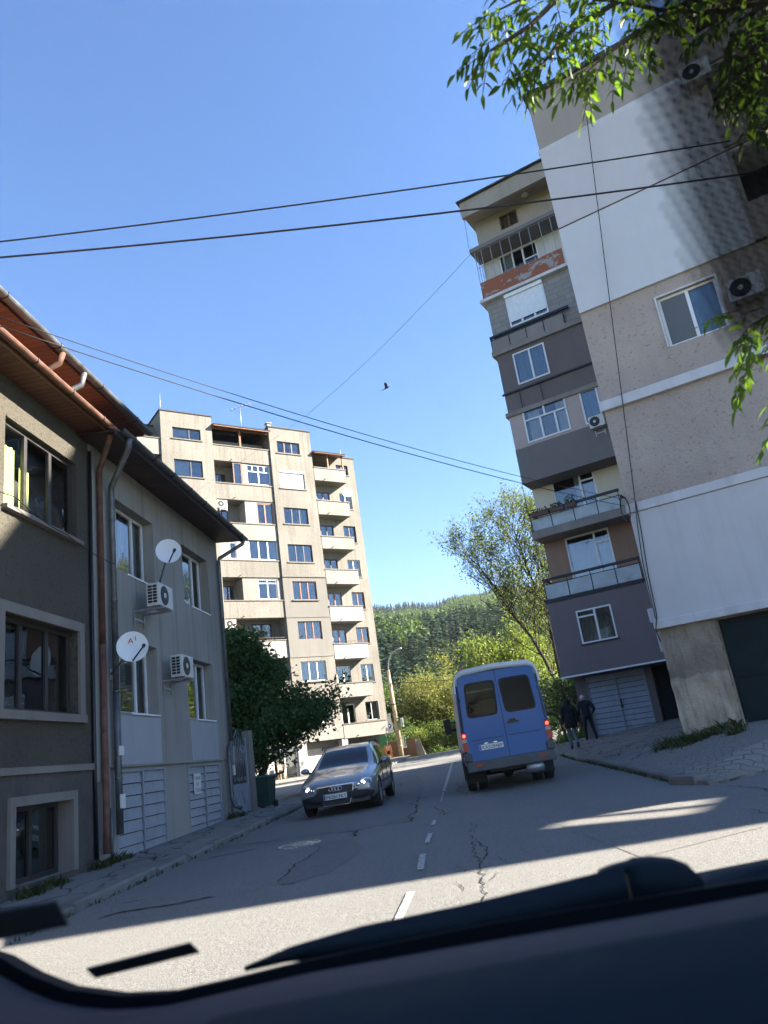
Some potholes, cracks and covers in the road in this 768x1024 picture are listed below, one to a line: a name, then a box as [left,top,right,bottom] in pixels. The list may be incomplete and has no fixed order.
manhole cover [277,840,321,850]
crack [198,829,363,885]
crack [456,822,506,900]
crack [100,896,211,918]
